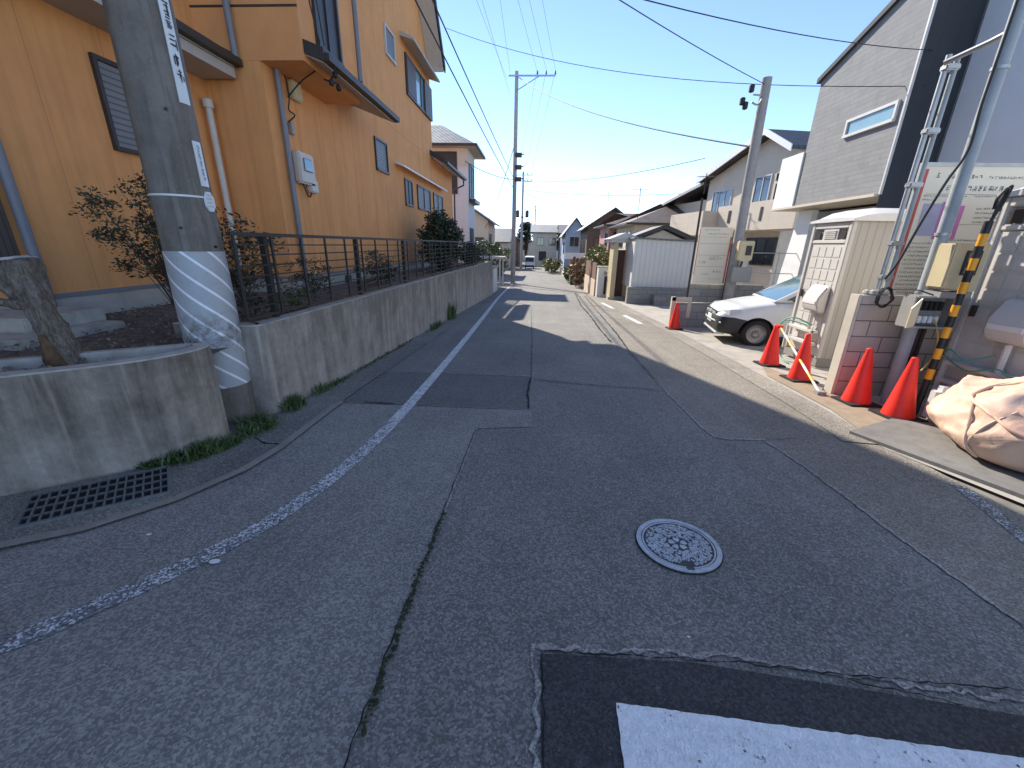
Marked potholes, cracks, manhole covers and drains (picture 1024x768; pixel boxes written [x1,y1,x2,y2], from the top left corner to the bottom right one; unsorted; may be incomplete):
manhole cover [635,519,724,574]
drain grate [11,465,172,531]
crack [540,650,1022,768]
